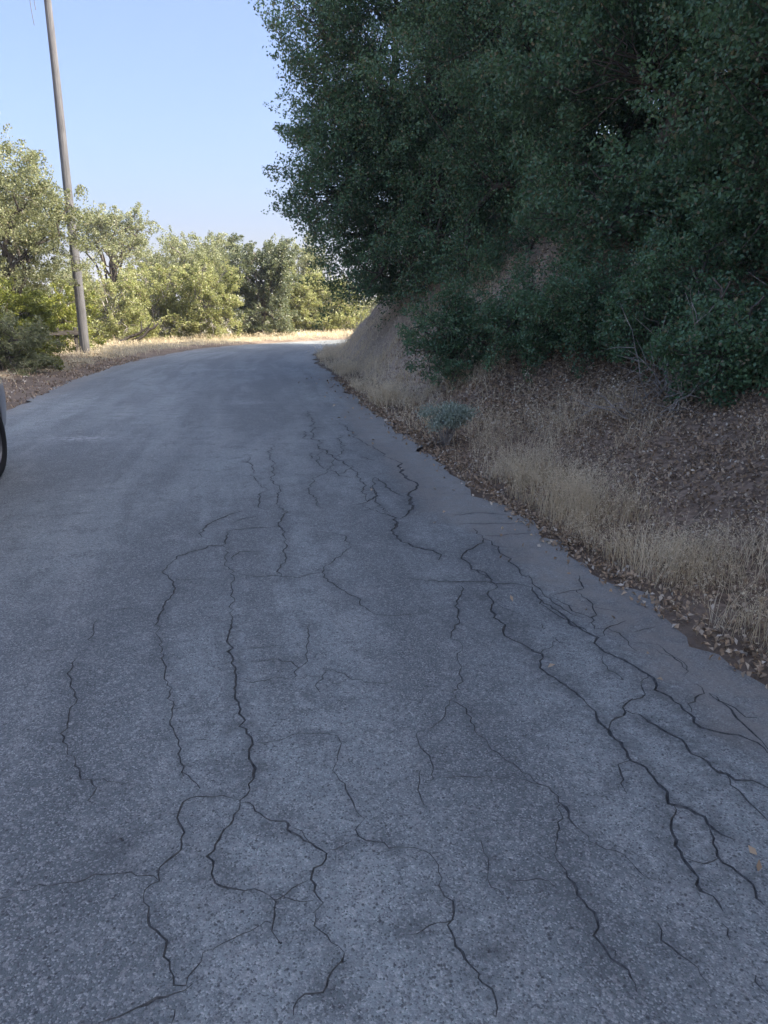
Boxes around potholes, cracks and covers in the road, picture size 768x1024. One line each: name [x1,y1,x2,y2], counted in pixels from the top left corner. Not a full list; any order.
crack [0,445,768,1024]
crack [304,411,442,560]
